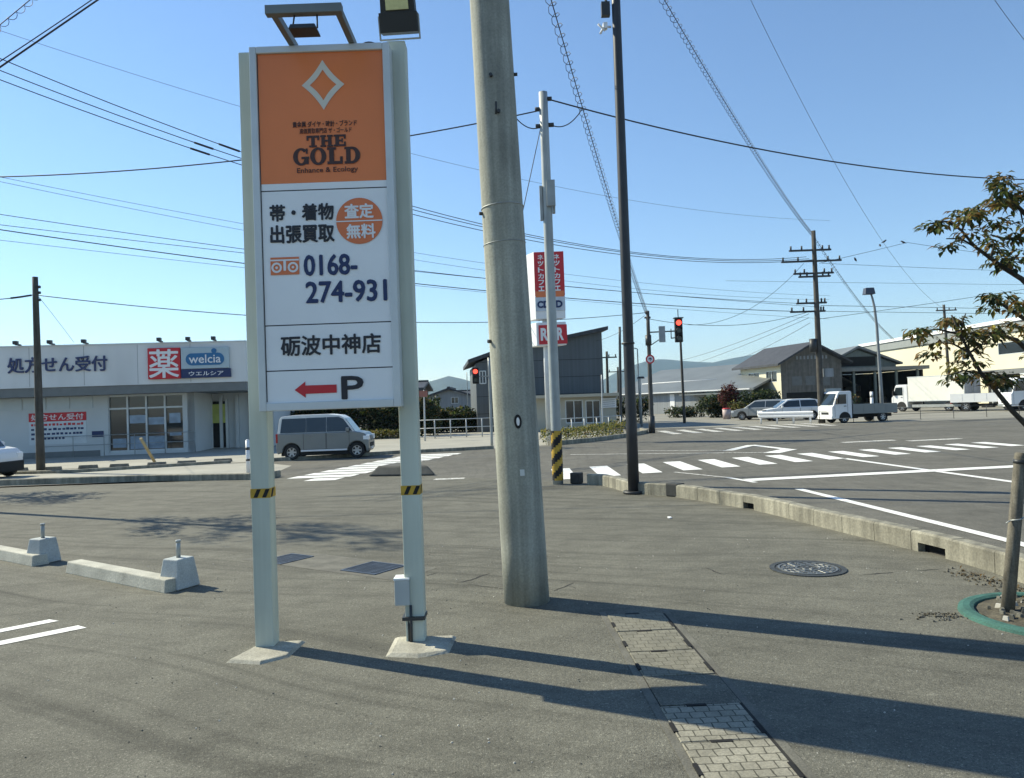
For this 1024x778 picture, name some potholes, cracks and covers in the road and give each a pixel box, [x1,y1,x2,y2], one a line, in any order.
drain grate [340,561,404,575]
drain grate [277,553,314,565]
manhole cover [769,560,847,577]
